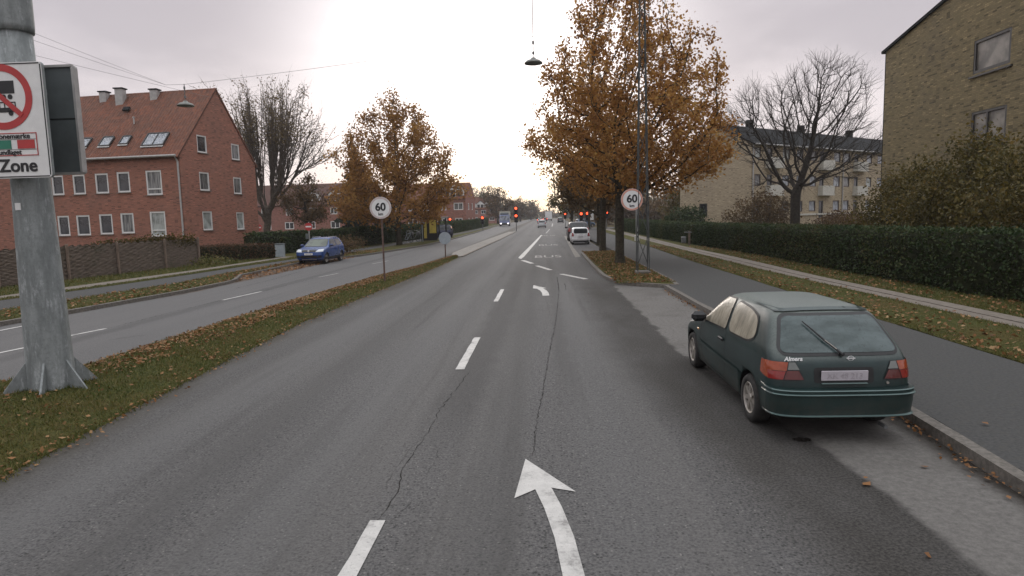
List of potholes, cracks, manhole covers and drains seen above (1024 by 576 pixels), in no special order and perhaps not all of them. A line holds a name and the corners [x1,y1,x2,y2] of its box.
crack [379,373,469,519]
